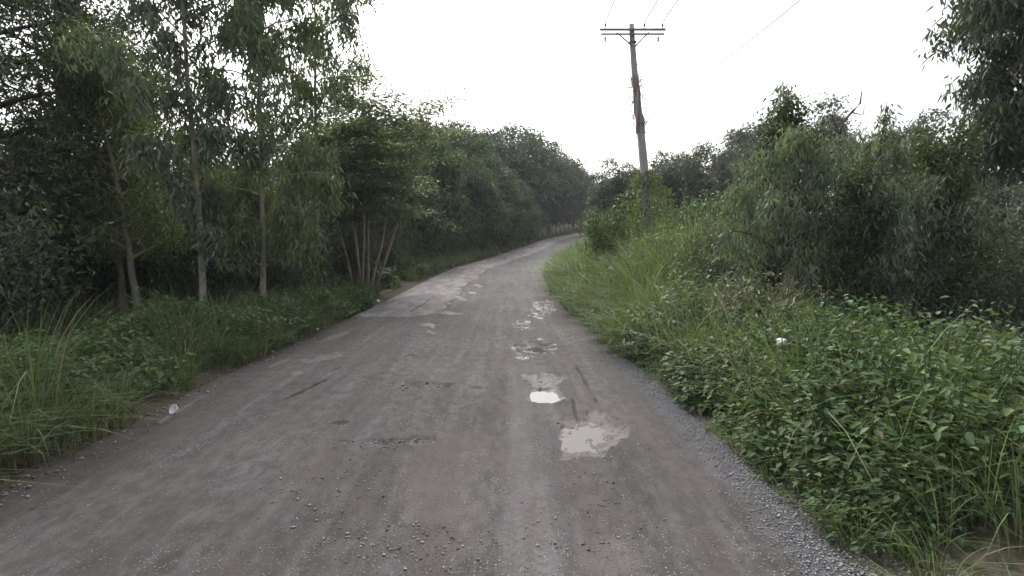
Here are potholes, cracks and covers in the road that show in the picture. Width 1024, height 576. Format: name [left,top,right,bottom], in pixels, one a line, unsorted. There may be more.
pothole [556,411,629,462]
pothole [521,372,566,390]
pothole [528,387,564,403]
pothole [512,338,557,360]
pothole [512,320,535,329]
crack [282,366,343,400]
pothole [396,381,444,390]
pothole [336,436,437,447]
pothole [528,300,555,319]
